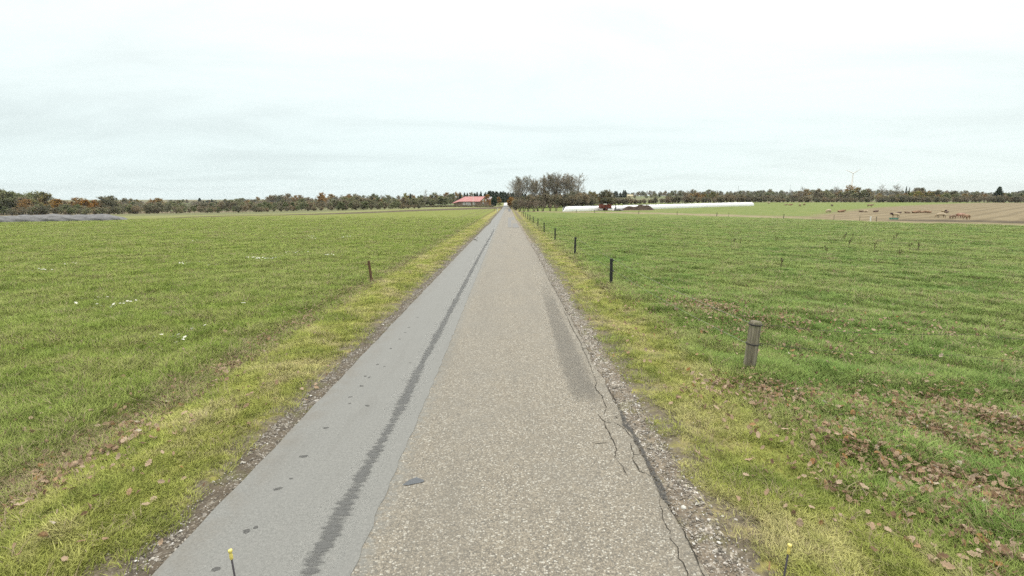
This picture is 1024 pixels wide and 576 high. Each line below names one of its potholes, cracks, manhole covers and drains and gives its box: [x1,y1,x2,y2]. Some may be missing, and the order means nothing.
crack [659,500,705,576]
